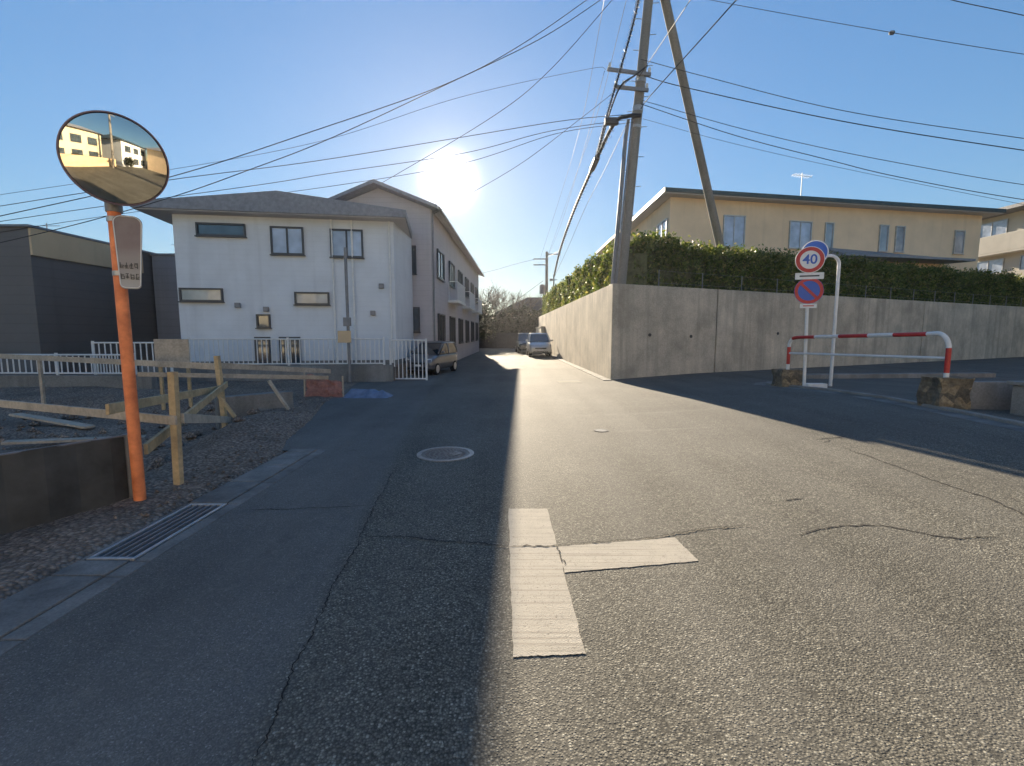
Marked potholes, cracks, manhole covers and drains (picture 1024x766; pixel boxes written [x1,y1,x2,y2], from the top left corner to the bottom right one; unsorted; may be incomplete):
crack [801,524,1000,539]
crack [361,525,764,565]
drain grate [86,503,227,563]
manhole cover [417,446,474,462]
